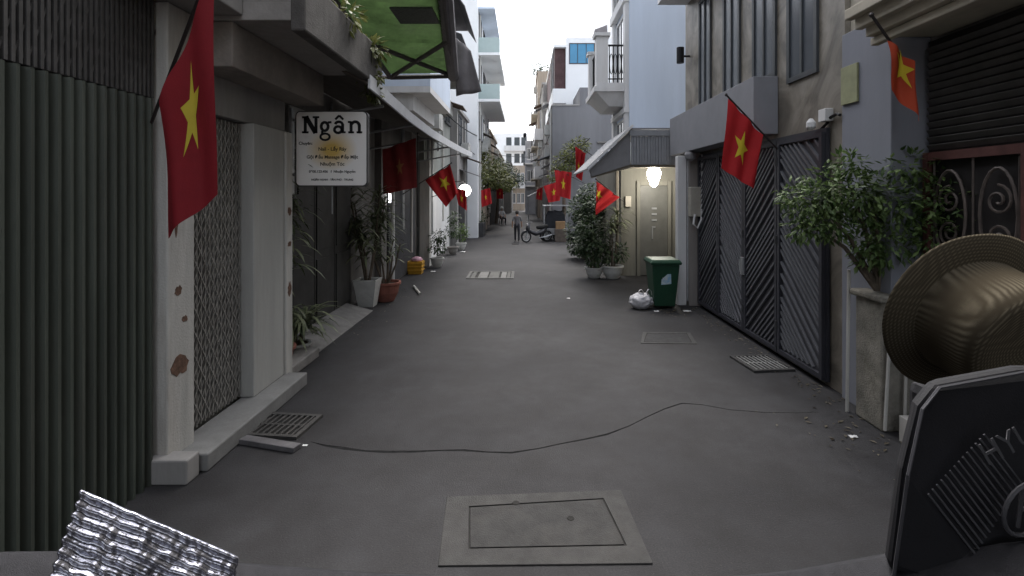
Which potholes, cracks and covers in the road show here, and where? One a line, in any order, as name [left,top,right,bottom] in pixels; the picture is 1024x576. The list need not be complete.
drain grate [730,354,796,373]
drain grate [247,412,323,440]
manhole cover [438,490,653,567]
manhole cover [641,332,697,344]
